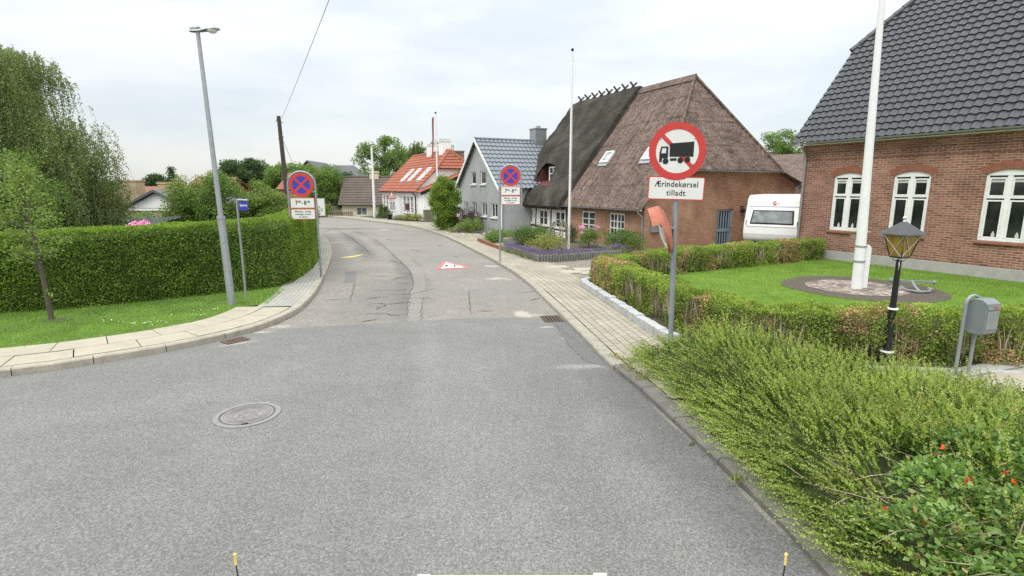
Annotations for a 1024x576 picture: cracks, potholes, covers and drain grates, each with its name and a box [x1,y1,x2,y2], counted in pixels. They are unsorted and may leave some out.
manhole cover [212,402,281,428]
crack [328,227,430,322]
drain grate [220,336,250,345]
